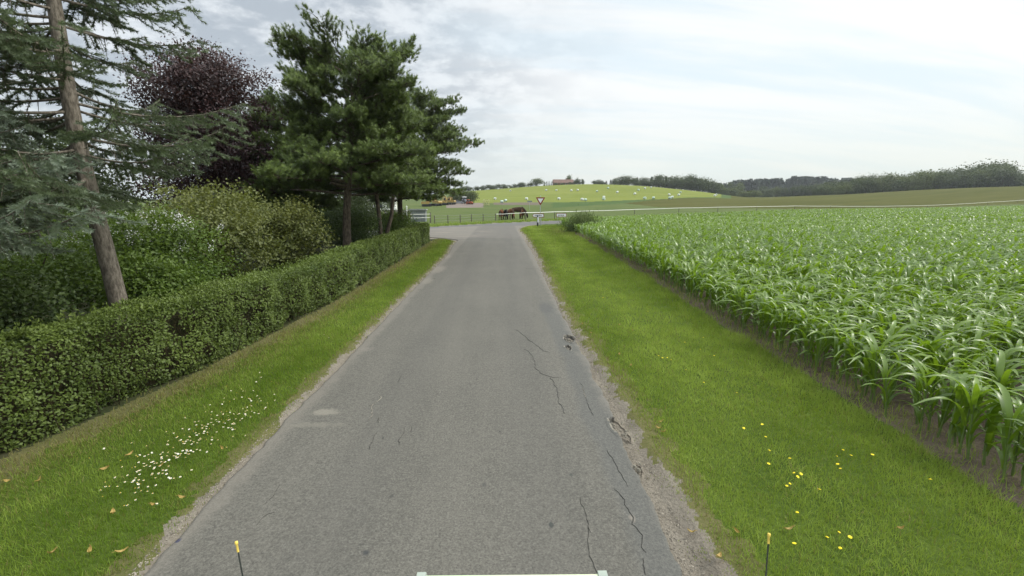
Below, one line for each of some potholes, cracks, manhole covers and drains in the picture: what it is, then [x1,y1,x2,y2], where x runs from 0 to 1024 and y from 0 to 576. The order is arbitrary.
pothole [628,461,646,479]
pothole [605,415,634,445]
crack [517,330,564,413]
crack [607,450,646,575]
